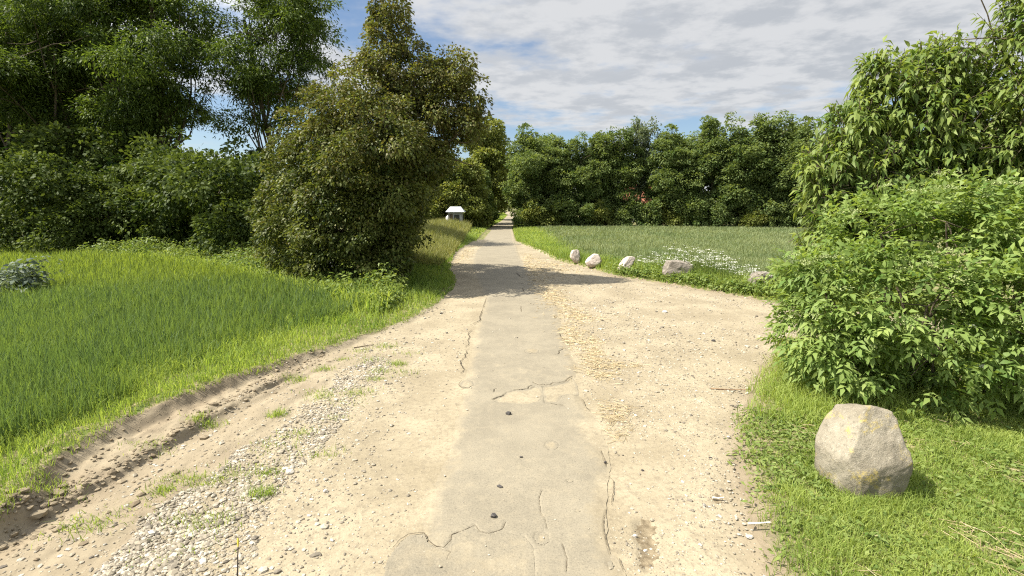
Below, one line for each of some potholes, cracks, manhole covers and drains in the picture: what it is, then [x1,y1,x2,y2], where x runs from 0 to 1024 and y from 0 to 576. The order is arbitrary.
crack [601,450,623,567]
crack [393,524,505,552]
